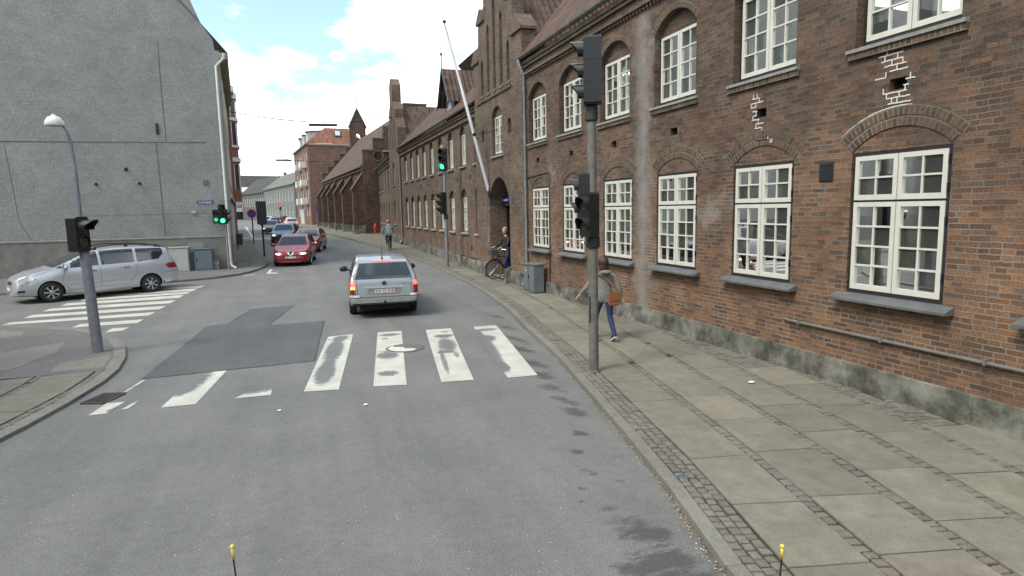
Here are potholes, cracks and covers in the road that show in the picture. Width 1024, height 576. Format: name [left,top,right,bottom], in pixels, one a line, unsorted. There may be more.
drain grate [80,392,126,404]
manhole cover [386,344,425,353]
